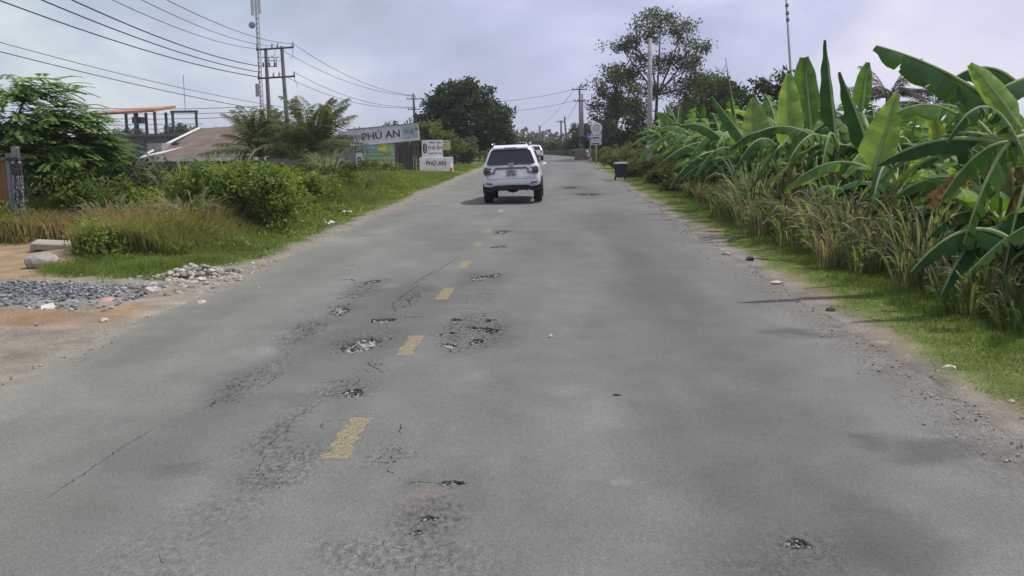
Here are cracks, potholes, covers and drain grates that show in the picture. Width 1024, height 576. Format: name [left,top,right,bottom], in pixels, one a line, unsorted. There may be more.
pothole [461,325,506,337]
crack [329,257,459,311]
pothole [329,335,392,354]
pothole [326,304,352,316]
crack [206,321,328,407]
pothole [460,273,503,281]
crack [45,430,152,500]
crack [254,400,323,490]
pothole [340,386,364,398]
pothole [778,537,813,552]
